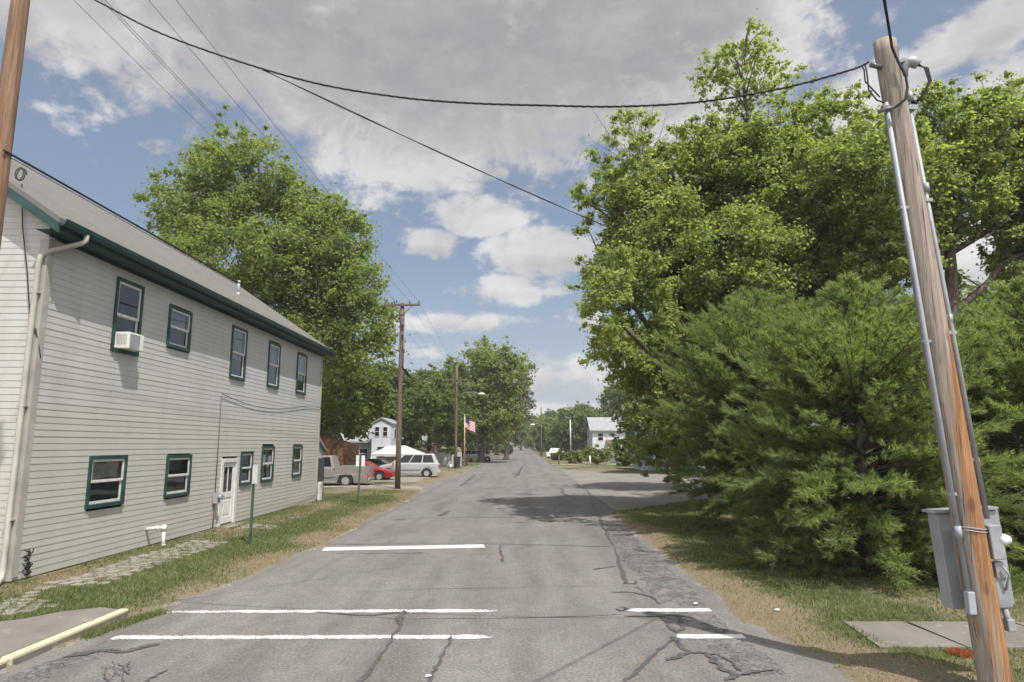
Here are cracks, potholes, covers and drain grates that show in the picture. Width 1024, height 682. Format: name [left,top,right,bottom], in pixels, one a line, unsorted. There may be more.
crack [102,660,168,682]
